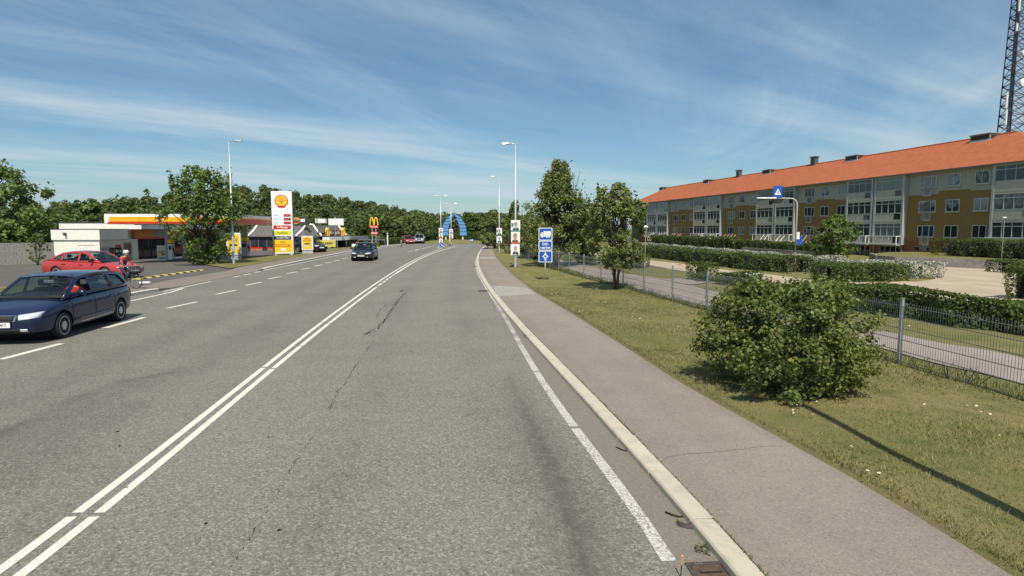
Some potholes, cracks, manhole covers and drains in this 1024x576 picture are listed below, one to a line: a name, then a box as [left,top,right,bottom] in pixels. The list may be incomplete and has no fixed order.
crack [225,290,406,575]
